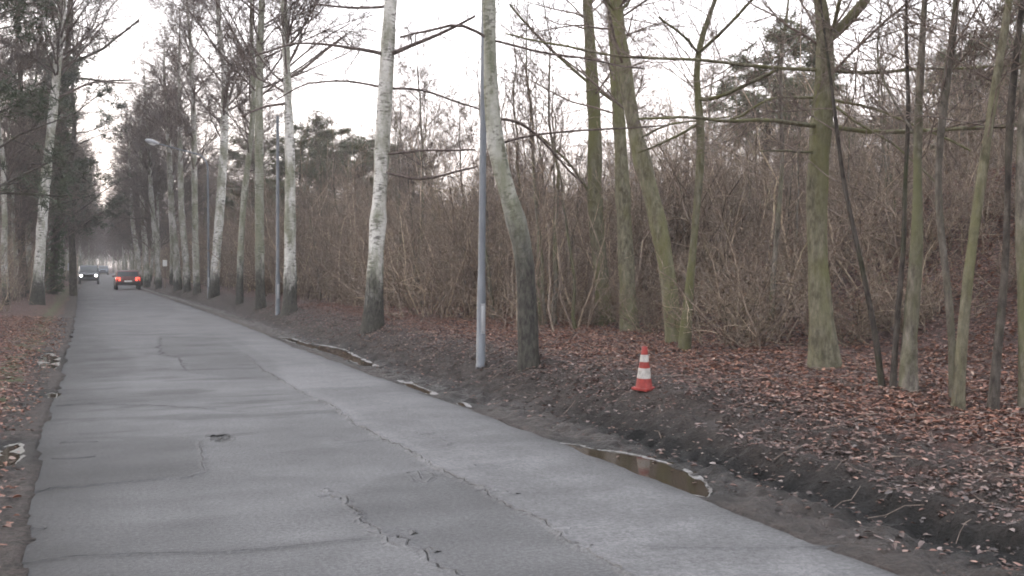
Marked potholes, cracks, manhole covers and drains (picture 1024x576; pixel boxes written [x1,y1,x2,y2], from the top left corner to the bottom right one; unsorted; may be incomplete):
crack [33,441,210,494]
crack [22,463,500,576]
crack [154,336,208,375]
pothole [204,432,235,443]
